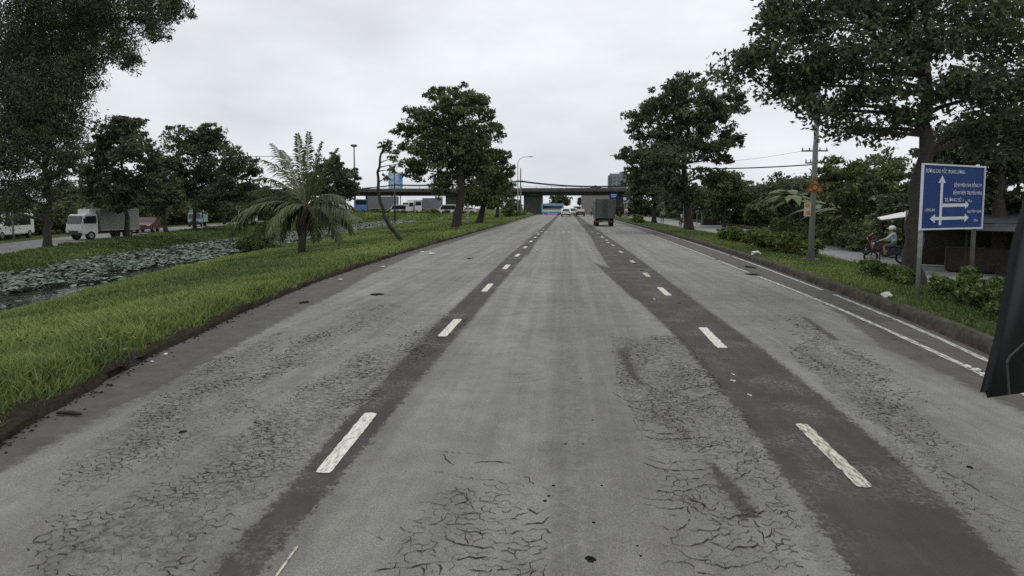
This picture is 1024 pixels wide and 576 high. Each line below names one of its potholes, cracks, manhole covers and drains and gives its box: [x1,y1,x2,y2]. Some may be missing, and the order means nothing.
crack [376,451,554,576]
crack [774,312,1022,560]
crack [27,304,471,576]
crack [610,336,845,576]
